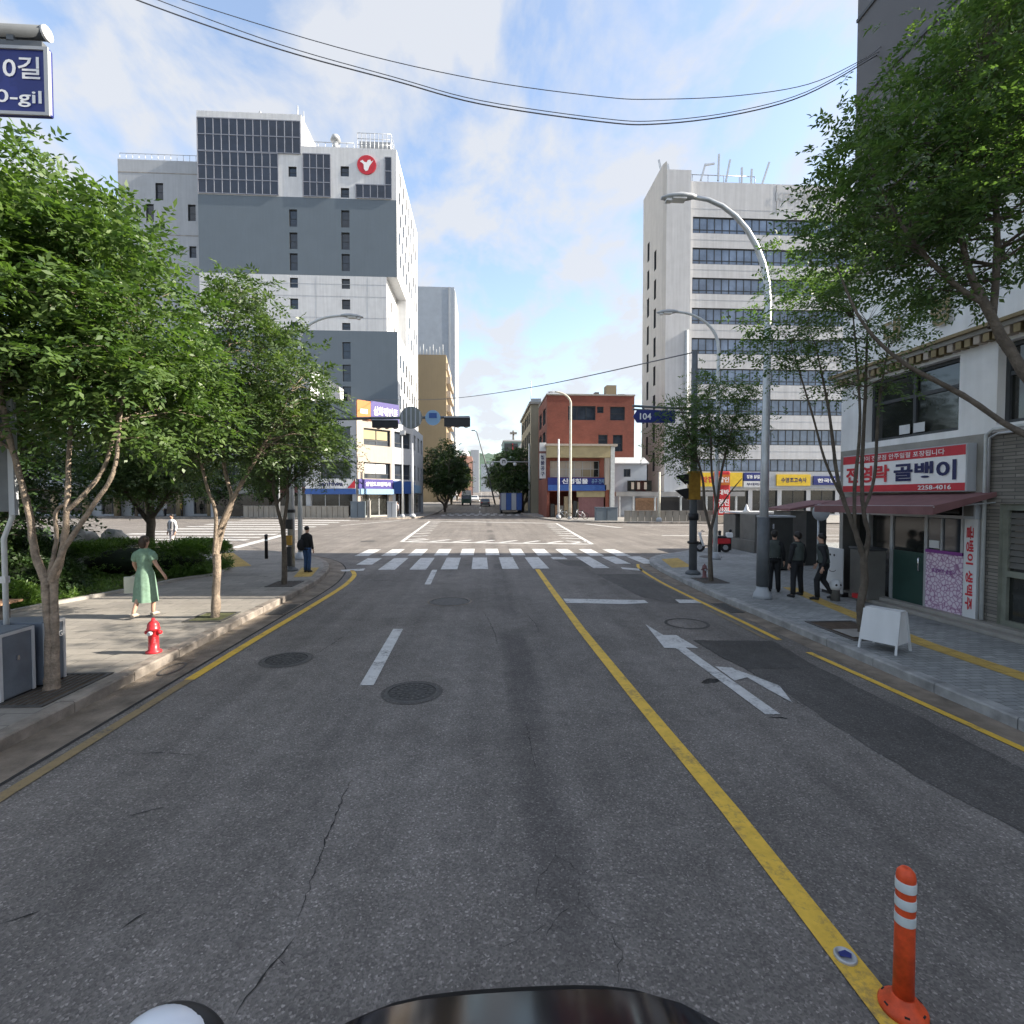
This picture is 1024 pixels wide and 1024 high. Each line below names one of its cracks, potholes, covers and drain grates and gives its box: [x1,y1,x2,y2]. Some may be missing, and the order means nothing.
manhole cover [381,681,443,704]
crack [297,780,352,919]
manhole cover [258,652,314,668]
crack [480,826,665,981]
manhole cover [427,597,472,606]
crack [236,937,295,1014]
